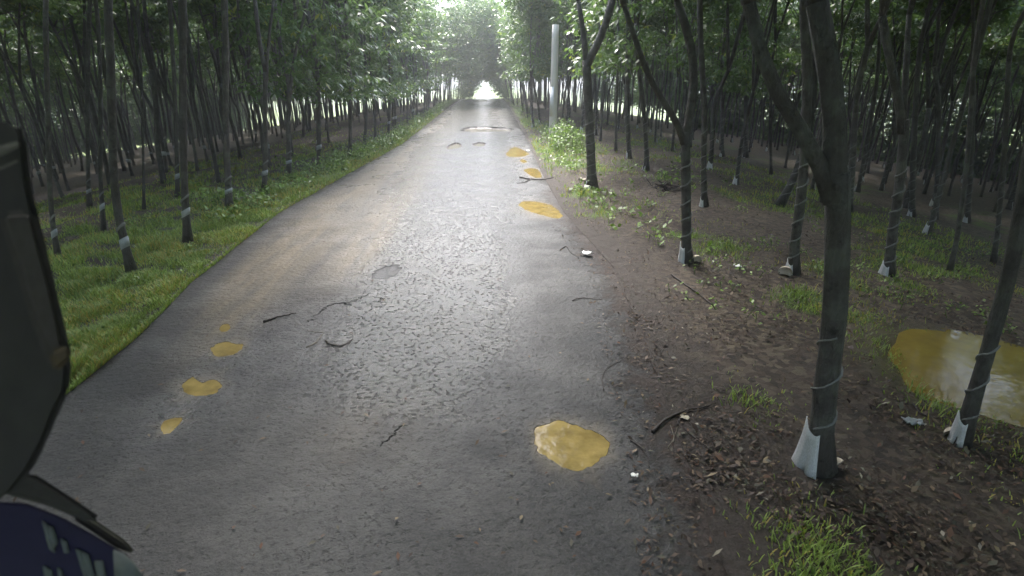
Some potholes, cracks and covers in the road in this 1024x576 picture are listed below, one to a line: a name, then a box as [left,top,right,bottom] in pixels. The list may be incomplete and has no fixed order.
crack [380,424,403,447]
pothole [371,264,402,280]
pothole [161,417,183,434]
crack [307,293,383,322]
pothole [534,420,610,471]
pothole [182,376,222,396]
pothole [506,147,529,157]
pothole [210,341,243,357]
pothole [519,201,563,218]
pothole [524,168,542,178]
